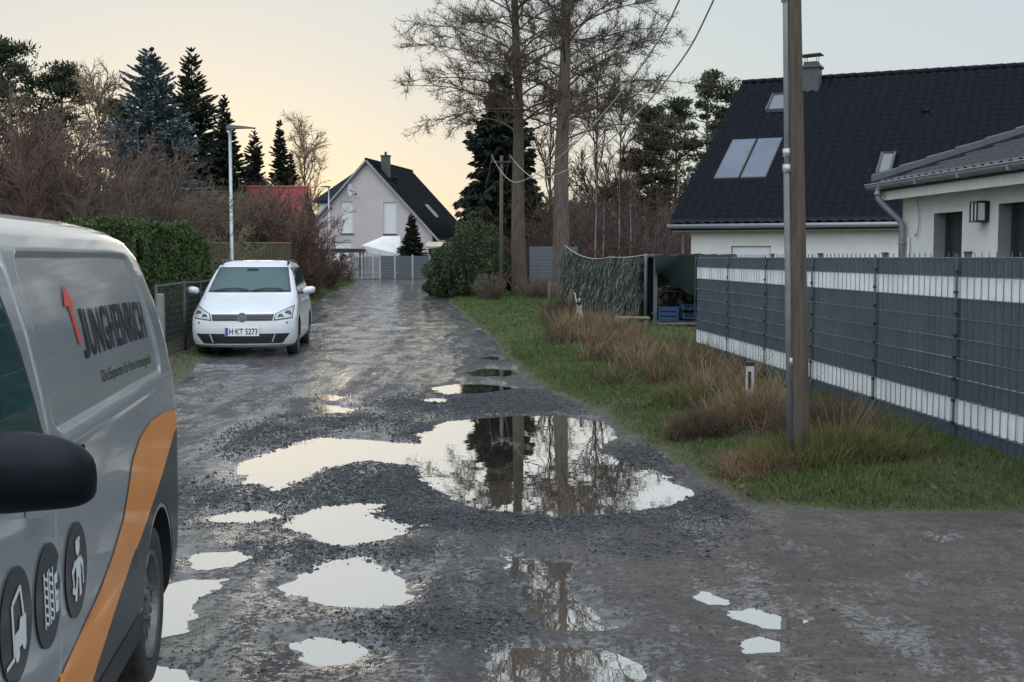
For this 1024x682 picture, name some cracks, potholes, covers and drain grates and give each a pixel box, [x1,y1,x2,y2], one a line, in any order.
pothole [677,586,744,608]
pothole [196,507,291,524]
pothole [268,552,424,609]
pothole [176,548,260,571]
pothole [161,574,245,639]
pothole [220,412,701,518]
pothole [150,662,210,682]
pothole [718,602,818,631]
pothole [303,403,358,414]
pothole [274,499,431,547]
pothole [461,366,521,377]
pothole [429,382,520,394]
